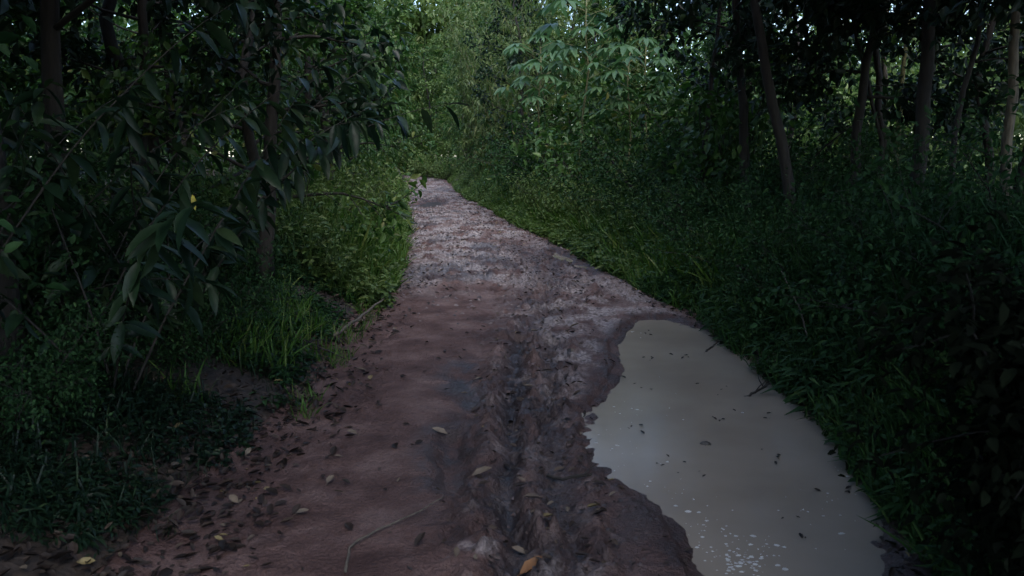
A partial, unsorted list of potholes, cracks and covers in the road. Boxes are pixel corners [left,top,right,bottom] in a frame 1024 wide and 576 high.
pothole [569,314,910,576]
